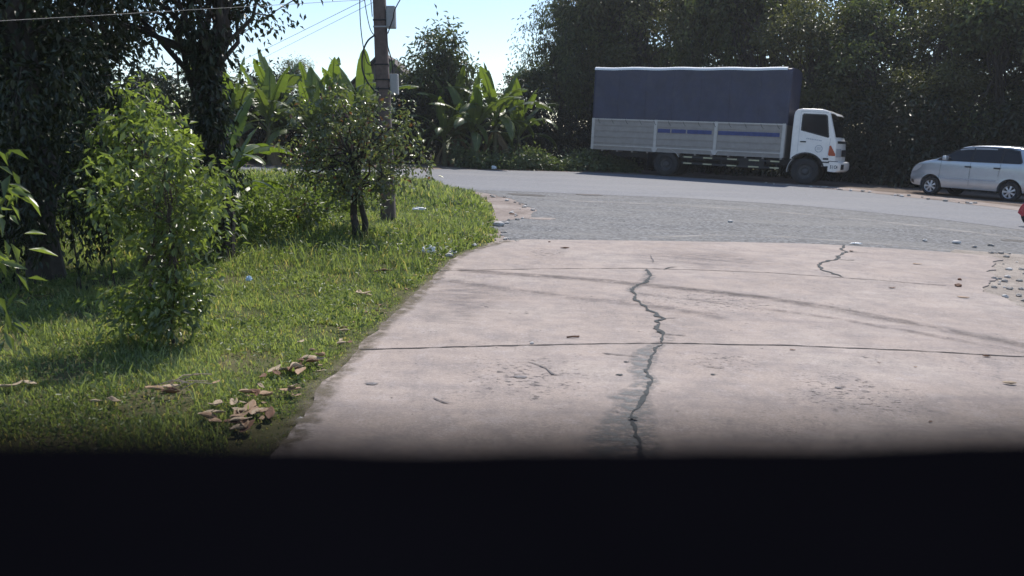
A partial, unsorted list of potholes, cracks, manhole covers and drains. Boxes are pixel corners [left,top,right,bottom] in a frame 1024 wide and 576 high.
crack [606,255,687,421]
crack [817,245,852,277]
